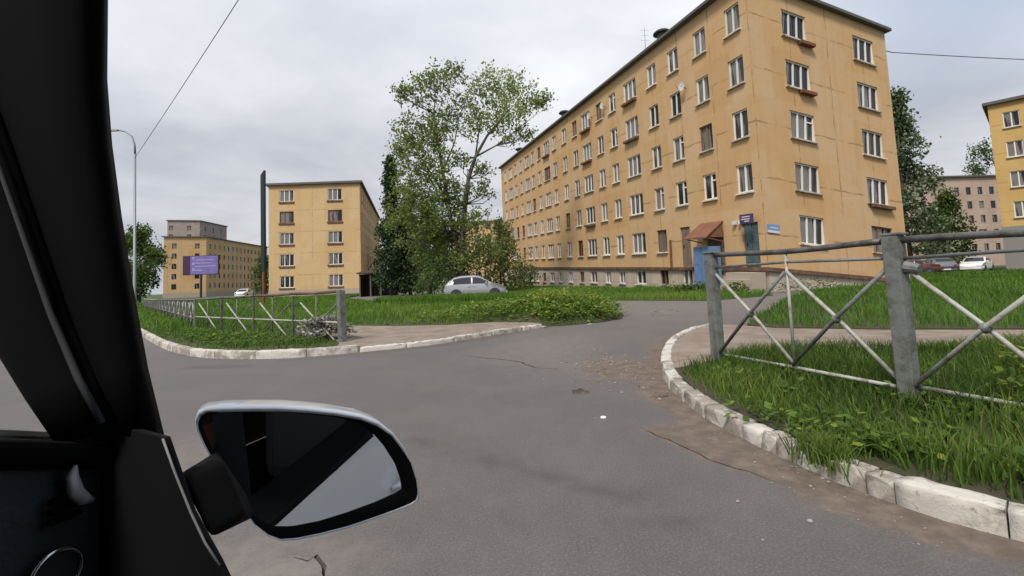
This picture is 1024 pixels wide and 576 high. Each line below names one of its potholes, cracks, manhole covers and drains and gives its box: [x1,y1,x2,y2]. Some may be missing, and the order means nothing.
crack [294,554,326,576]
crack [648,431,766,479]
